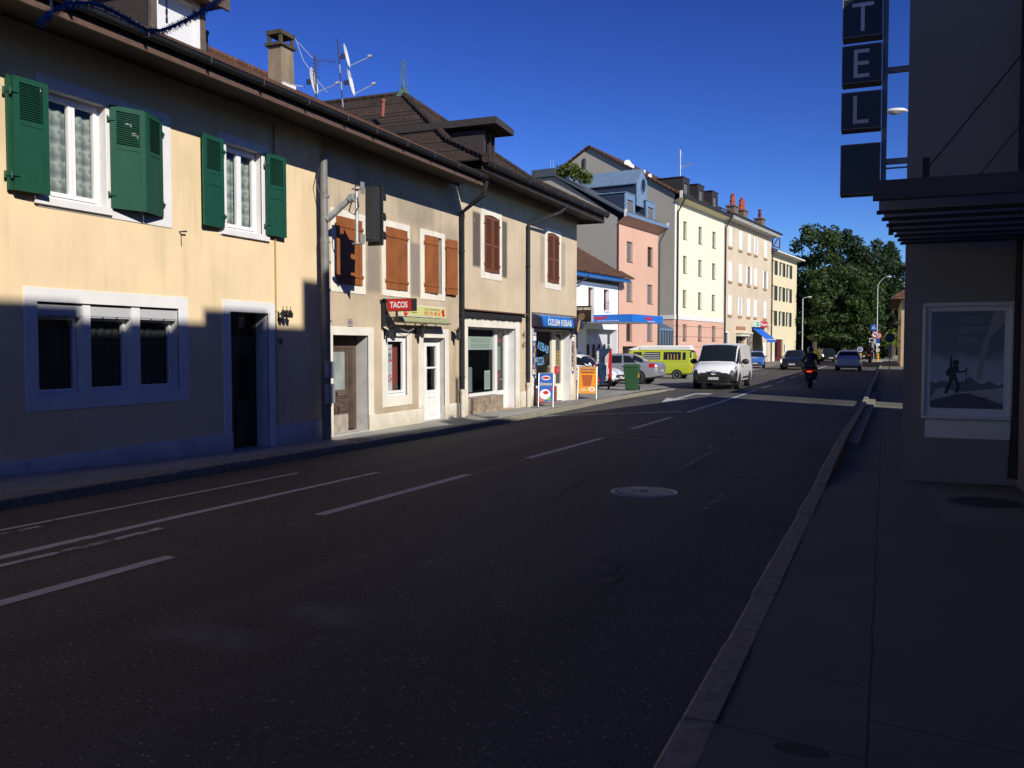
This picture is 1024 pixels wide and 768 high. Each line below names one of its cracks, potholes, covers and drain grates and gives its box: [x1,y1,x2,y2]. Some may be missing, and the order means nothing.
manhole cover [610,486,678,497]
crack [571,553,632,584]
crack [613,432,807,480]
